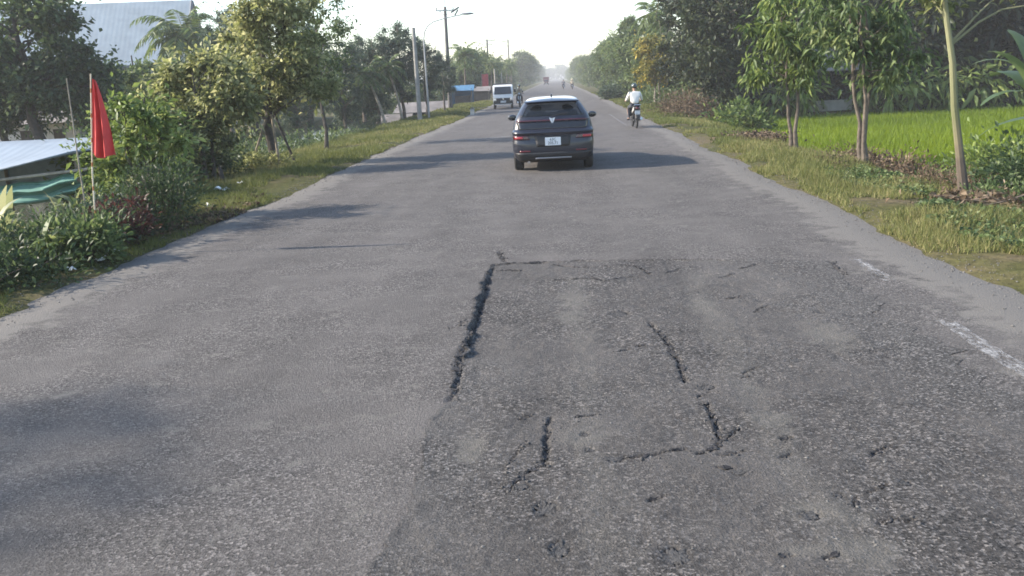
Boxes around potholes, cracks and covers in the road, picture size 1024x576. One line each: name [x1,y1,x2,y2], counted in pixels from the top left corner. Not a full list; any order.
crack [628,447,683,458]
crack [642,322,742,469]
pothole [797,510,820,521]
crack [449,253,650,400]
crack [504,417,553,484]
